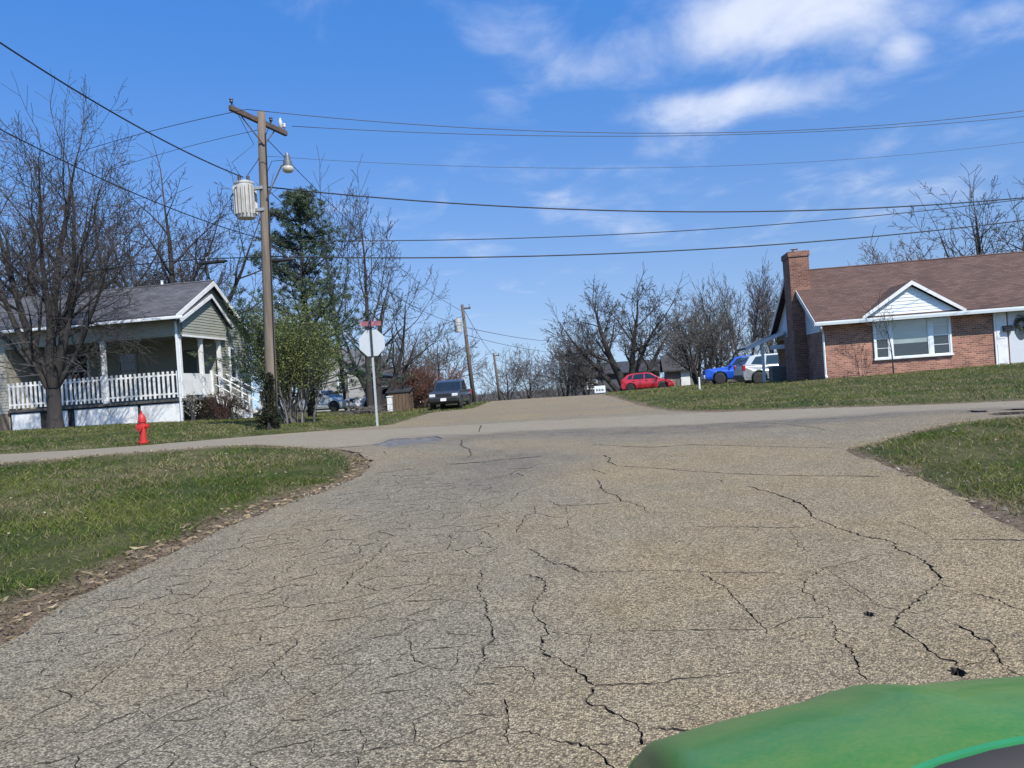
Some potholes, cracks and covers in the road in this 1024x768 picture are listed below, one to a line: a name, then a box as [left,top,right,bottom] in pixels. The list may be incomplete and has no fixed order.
crack [0,425,1024,768]
pothole [947,667,969,677]
